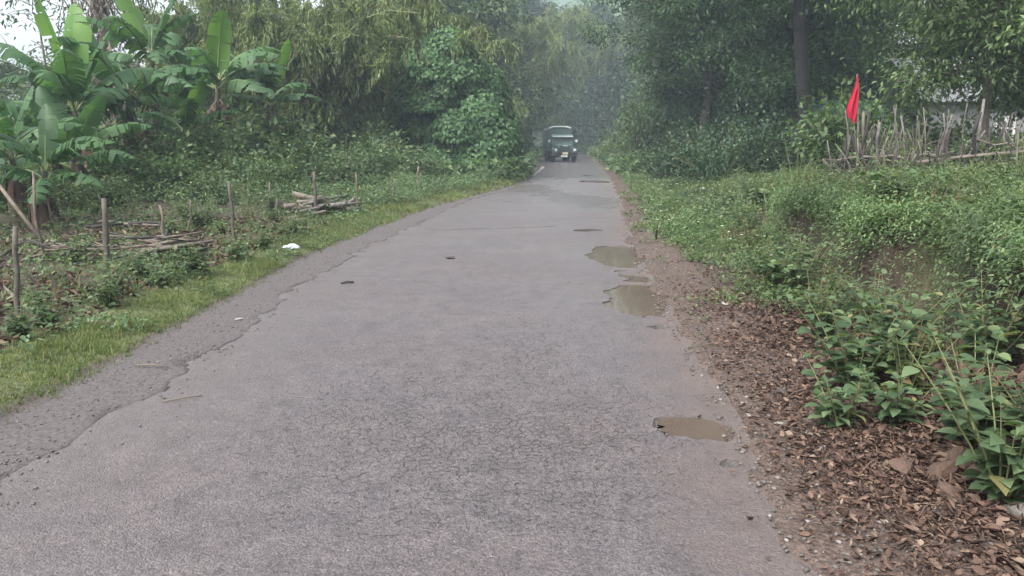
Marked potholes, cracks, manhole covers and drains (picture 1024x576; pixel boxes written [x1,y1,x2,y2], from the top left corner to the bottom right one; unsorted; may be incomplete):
pothole [602,284,669,317]
pothole [652,416,735,443]
pothole [584,245,646,268]
